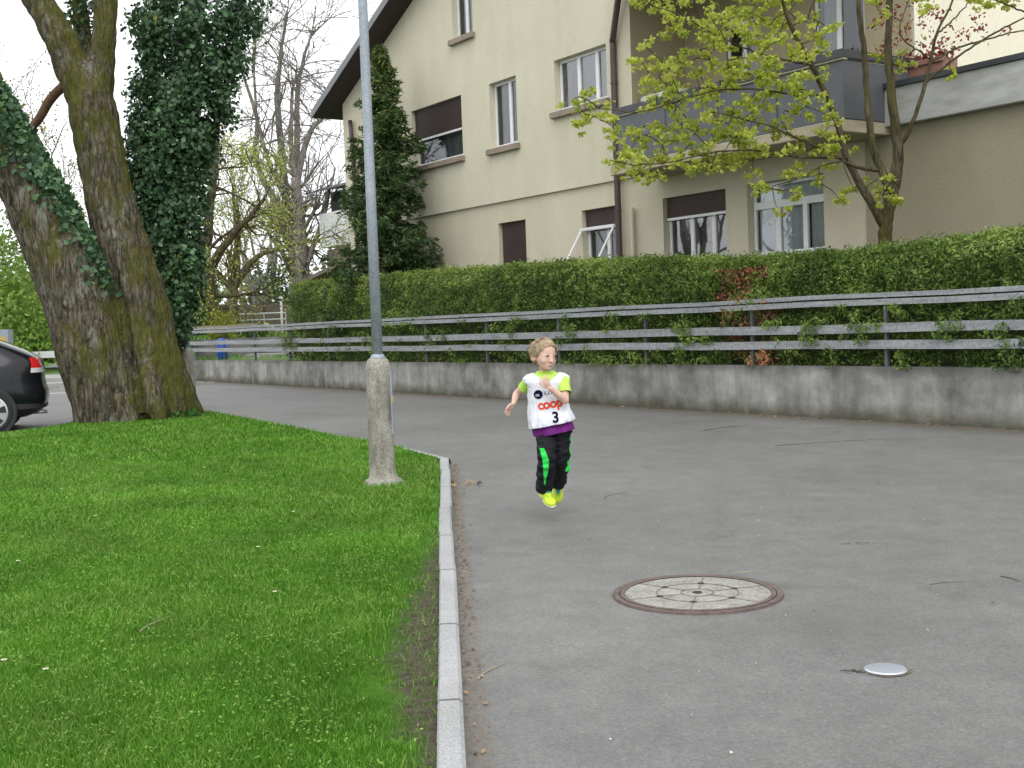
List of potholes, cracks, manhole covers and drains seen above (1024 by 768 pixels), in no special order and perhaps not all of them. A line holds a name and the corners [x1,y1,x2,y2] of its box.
manhole cover [613,574,784,615]
